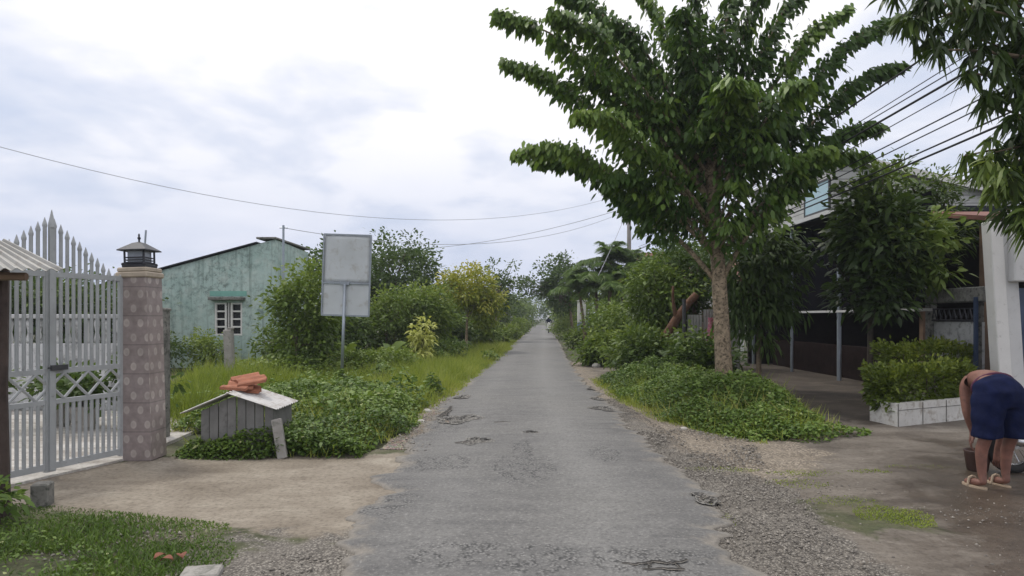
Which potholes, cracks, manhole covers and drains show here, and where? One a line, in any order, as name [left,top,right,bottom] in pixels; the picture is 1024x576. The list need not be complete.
pothole [461,437,496,445]
pothole [438,414,485,424]
crack [622,558,688,570]
pothole [691,491,721,506]
